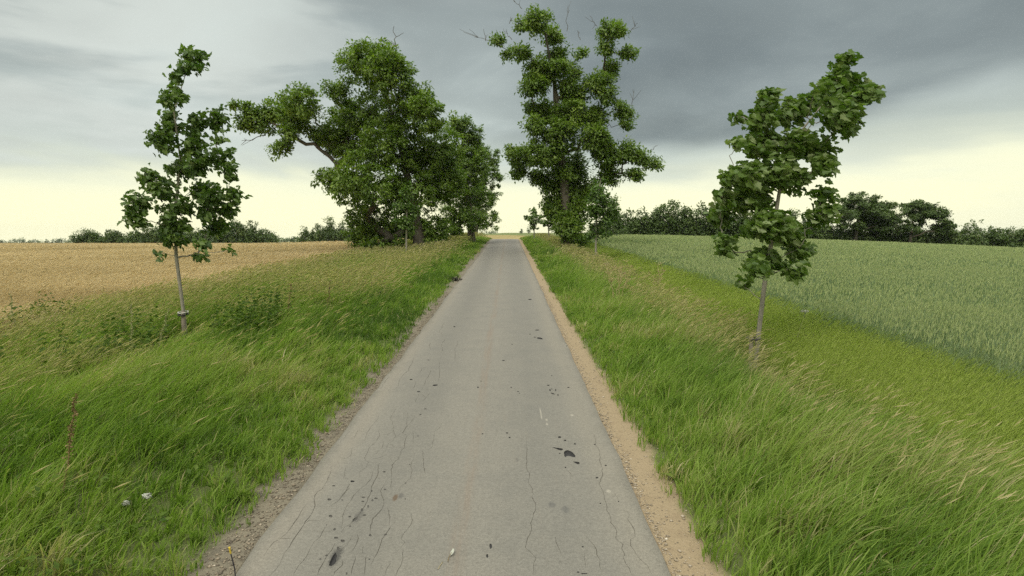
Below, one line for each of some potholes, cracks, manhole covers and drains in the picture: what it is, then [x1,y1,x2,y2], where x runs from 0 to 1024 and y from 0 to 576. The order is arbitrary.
crack [525,440,536,572]
crack [594,435,650,576]
crack [266,409,440,576]
